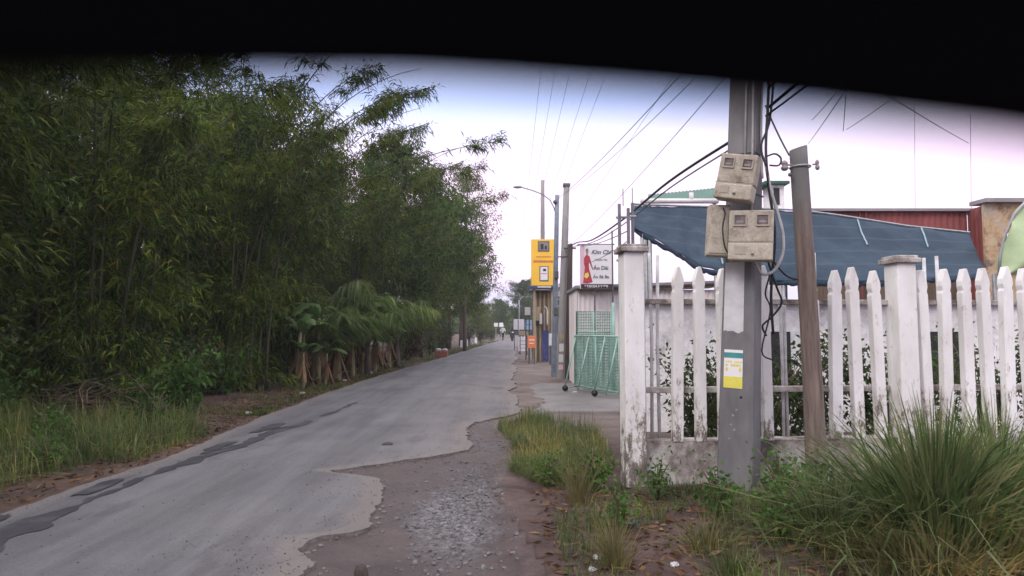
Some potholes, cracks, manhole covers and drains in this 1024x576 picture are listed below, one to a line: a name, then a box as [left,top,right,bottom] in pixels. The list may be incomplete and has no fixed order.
pothole [299,419,546,576]
